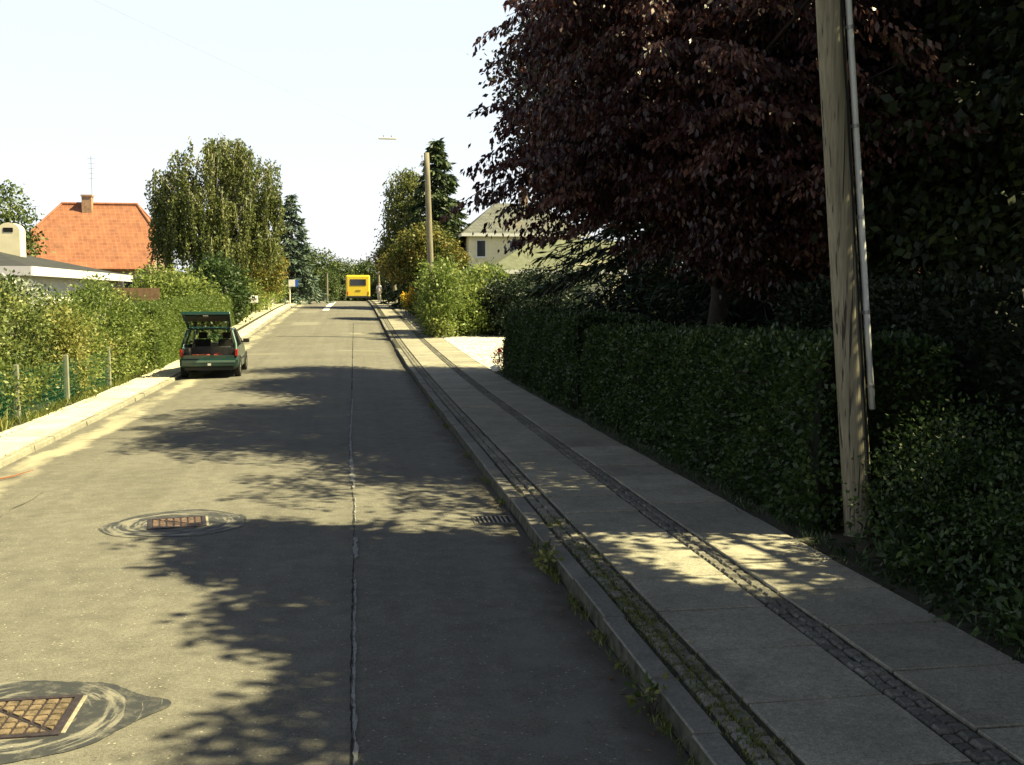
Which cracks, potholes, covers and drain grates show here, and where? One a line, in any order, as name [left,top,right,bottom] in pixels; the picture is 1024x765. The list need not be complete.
manhole cover [98,509,247,537]
drain grate [471,515,515,524]
manhole cover [0,680,172,764]
